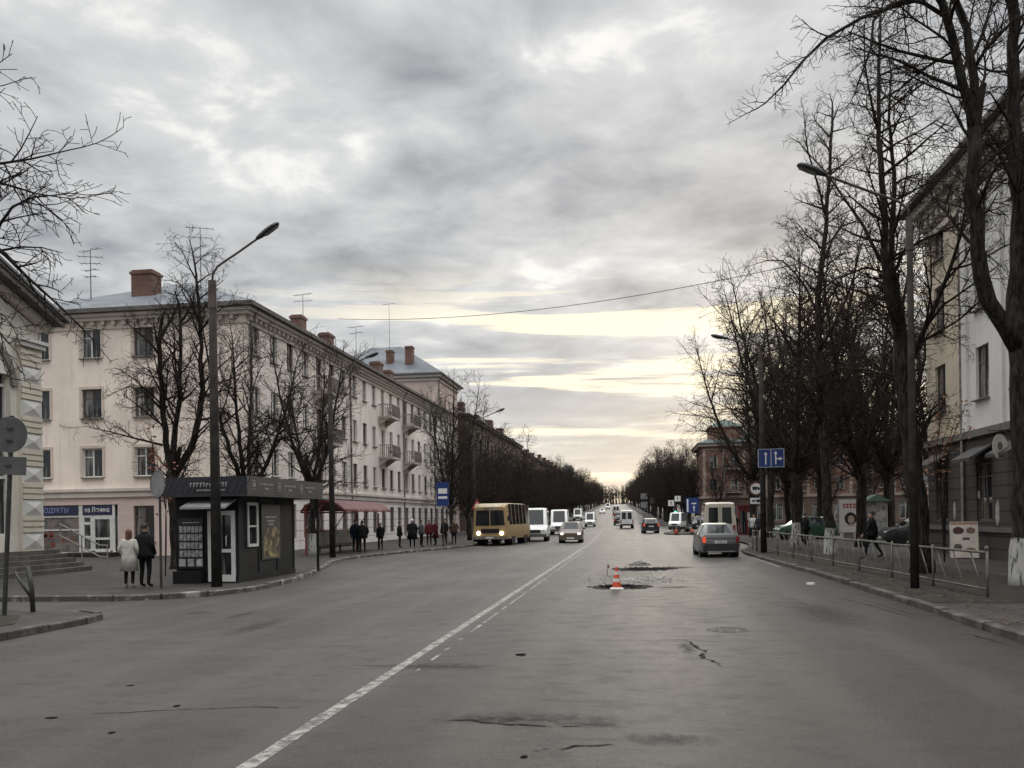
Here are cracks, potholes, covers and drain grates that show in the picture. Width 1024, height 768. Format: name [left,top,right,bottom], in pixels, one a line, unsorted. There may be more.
crack [683,639,720,666]
crack [533,744,611,752]
